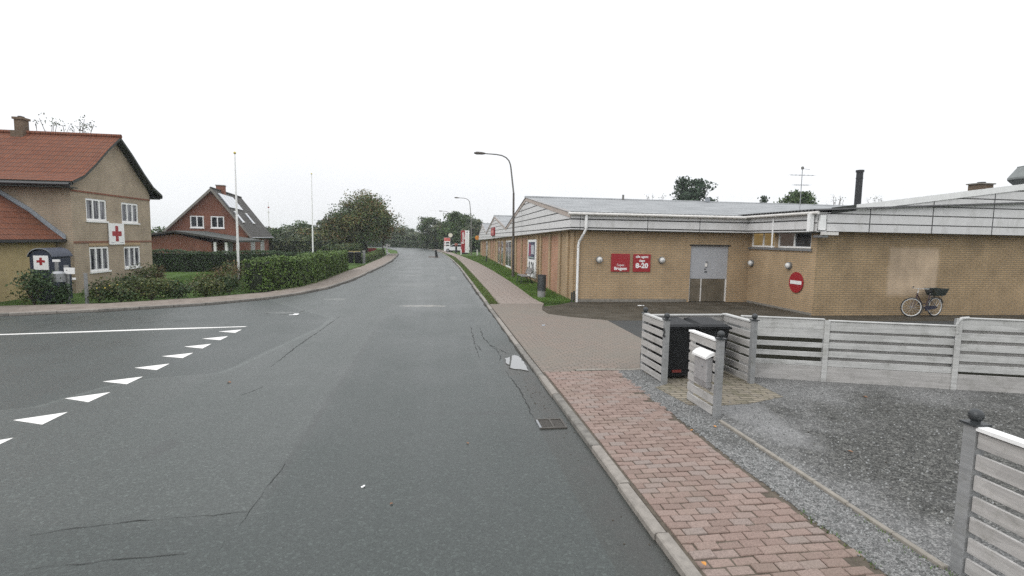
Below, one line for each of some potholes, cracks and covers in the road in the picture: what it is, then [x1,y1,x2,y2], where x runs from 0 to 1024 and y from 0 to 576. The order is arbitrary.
crack [31,464,285,550]
drain grate [535,418,568,430]
crack [32,553,187,569]
